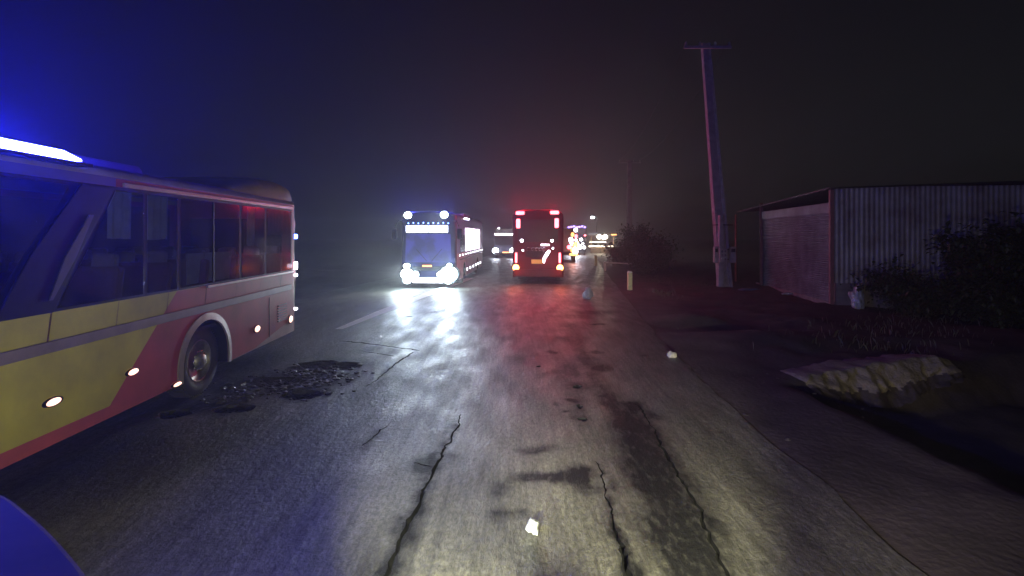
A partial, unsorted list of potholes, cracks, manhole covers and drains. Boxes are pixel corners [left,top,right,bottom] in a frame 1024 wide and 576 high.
pothole [280,390,322,400]
crack [362,414,461,576]
crack [595,403,730,576]
pothole [211,403,256,413]
pothole [241,377,307,388]
pothole [288,360,359,371]
crack [346,341,419,386]
pothole [153,409,193,419]
